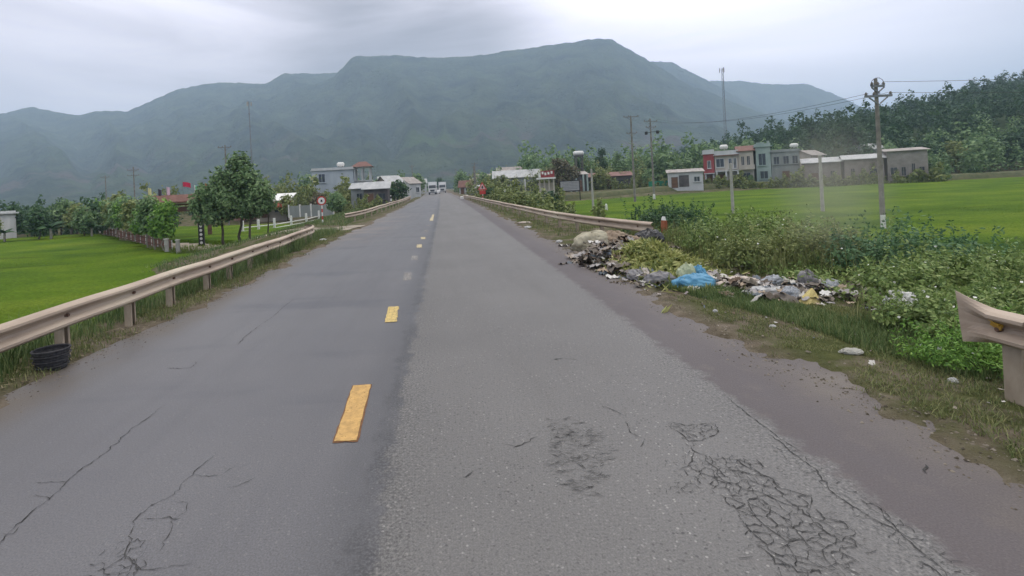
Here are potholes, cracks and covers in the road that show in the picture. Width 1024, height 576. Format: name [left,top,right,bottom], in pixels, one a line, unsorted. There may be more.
crack [89,453,250,576]
crack [505,417,615,499]
crack [2,407,161,540]
